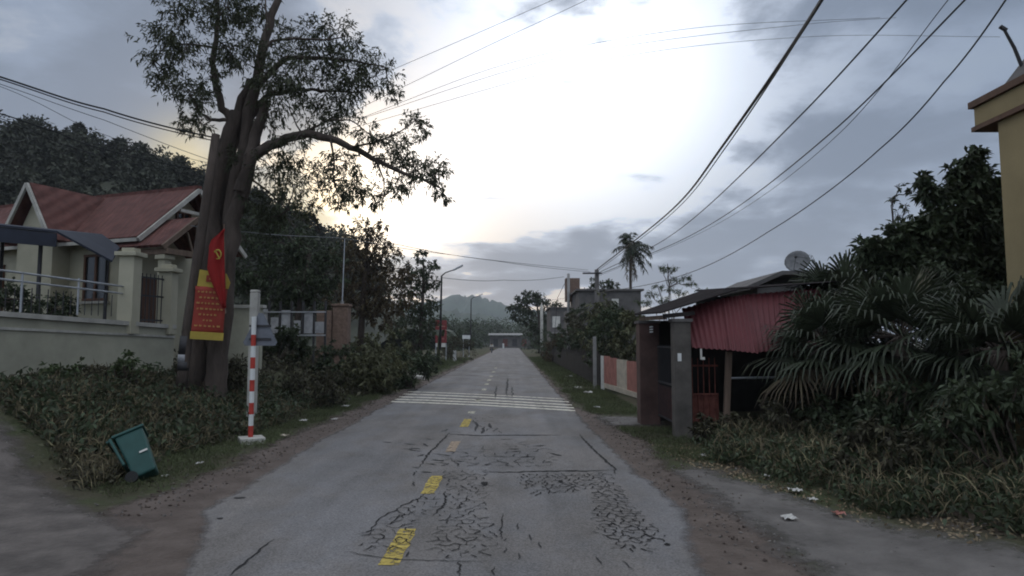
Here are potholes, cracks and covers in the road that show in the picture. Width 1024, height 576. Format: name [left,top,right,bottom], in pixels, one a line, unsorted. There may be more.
crack [345,416,665,576]
crack [231,539,274,575]
crack [466,371,514,398]
